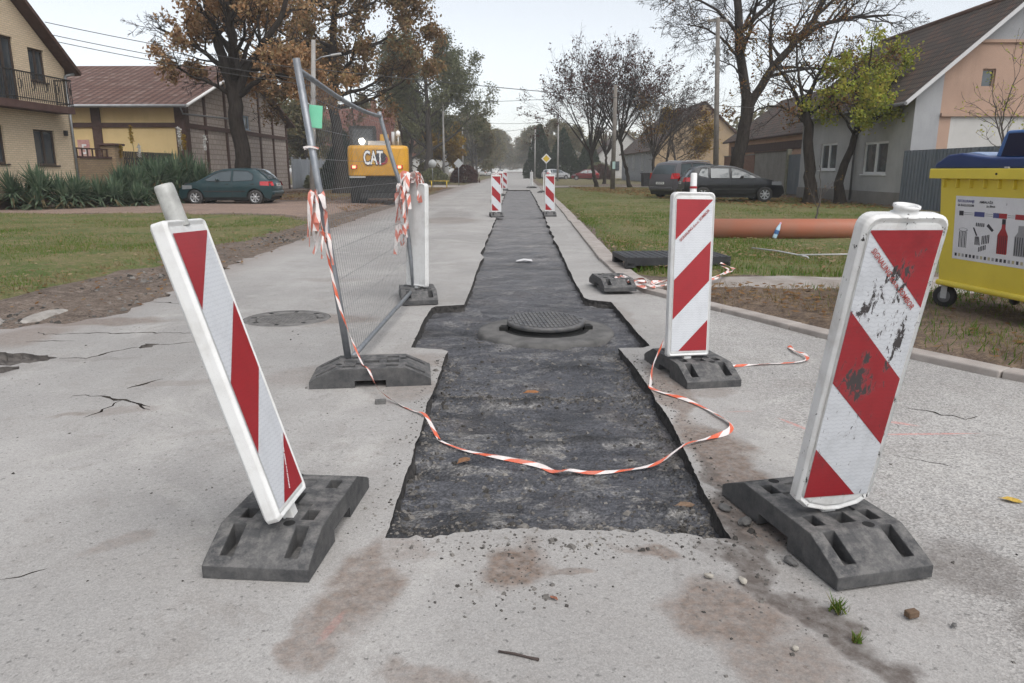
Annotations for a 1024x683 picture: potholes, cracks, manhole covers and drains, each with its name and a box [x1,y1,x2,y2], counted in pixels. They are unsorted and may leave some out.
crack [908,408,977,420]
pothole [0,352,56,366]
manhole cover [478,311,614,350]
manhole cover [243,311,330,327]
crack [26,332,187,359]
crack [75,379,160,418]
